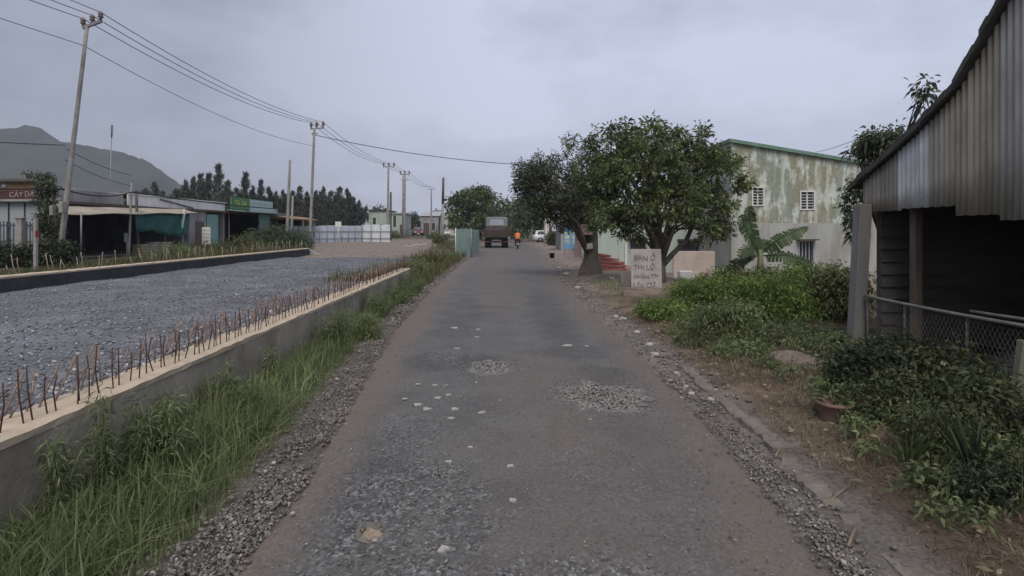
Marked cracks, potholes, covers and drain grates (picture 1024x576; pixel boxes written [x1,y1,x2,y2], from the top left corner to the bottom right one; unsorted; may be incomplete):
pothole [355,521,389,543]
pothole [467,360,511,375]
pothole [552,379,655,414]
